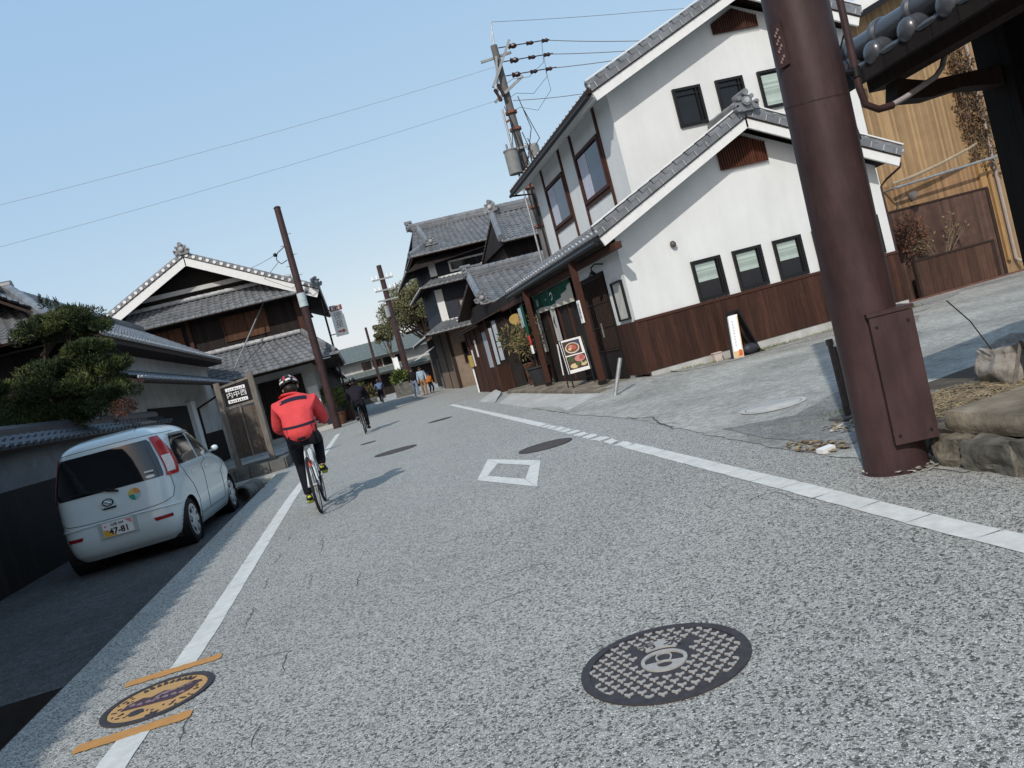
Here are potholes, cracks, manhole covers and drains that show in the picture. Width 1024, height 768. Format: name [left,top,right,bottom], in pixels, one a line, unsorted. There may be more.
manhole cover [581,623,752,706]
manhole cover [519,438,572,454]
manhole cover [99,671,215,728]
manhole cover [740,397,807,414]
manhole cover [374,444,416,457]
